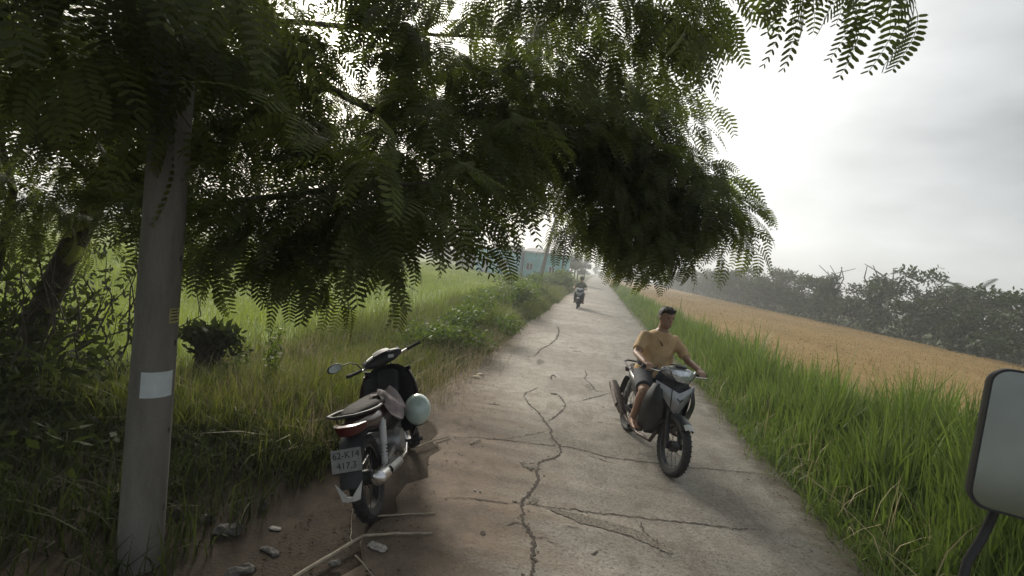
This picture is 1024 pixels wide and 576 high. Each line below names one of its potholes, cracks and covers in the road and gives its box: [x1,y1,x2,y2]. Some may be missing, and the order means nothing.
crack [445,370,763,576]
